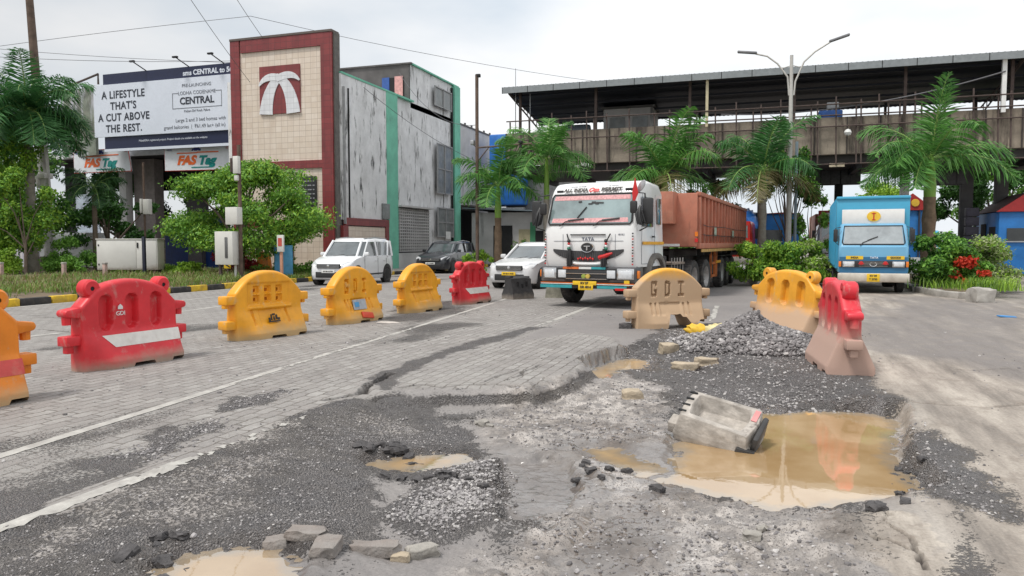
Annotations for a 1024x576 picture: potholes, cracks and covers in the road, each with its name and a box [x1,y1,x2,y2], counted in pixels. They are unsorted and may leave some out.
crack [833,511,932,571]
pothole [350,445,486,474]
crack [318,363,545,402]
pothole [633,396,963,515]
pothole [122,528,326,576]
pothole [577,346,656,379]
